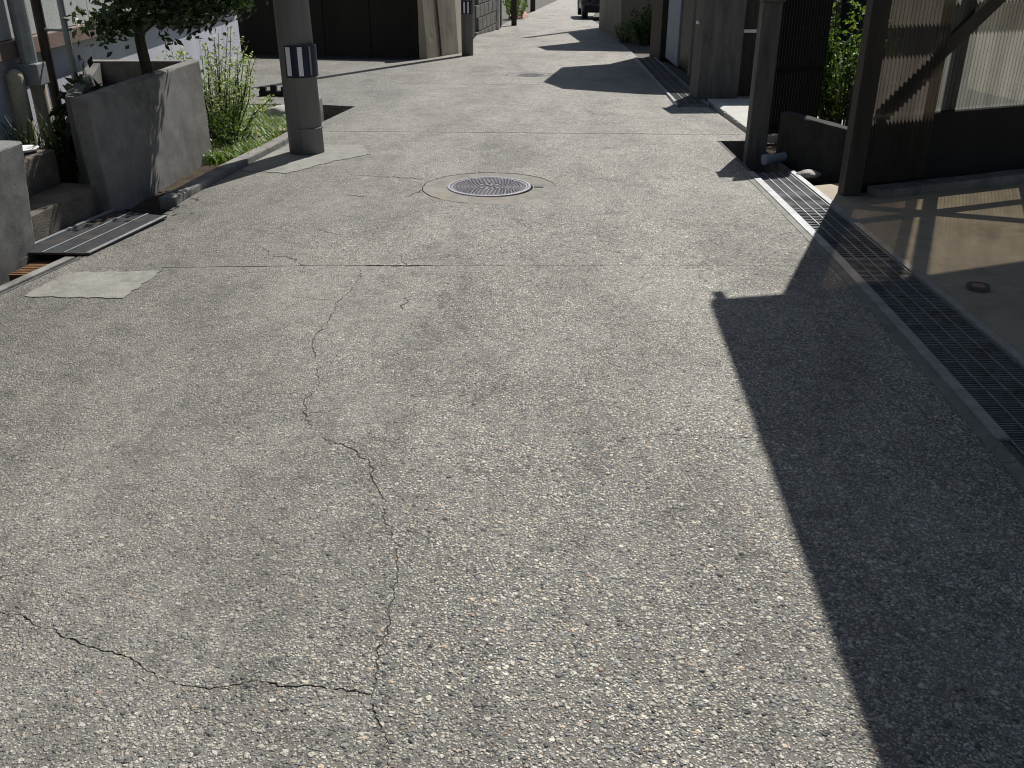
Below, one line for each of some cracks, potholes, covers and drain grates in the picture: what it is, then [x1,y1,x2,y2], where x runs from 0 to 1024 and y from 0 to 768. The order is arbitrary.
manhole cover [423,173,556,204]
drain grate [654,77,706,106]
drain grate [637,58,676,77]
crack [0,270,399,768]
drain grate [844,258,979,331]
drain grate [911,330,1024,448]
drain grate [794,208,892,258]
drain grate [756,172,832,209]
